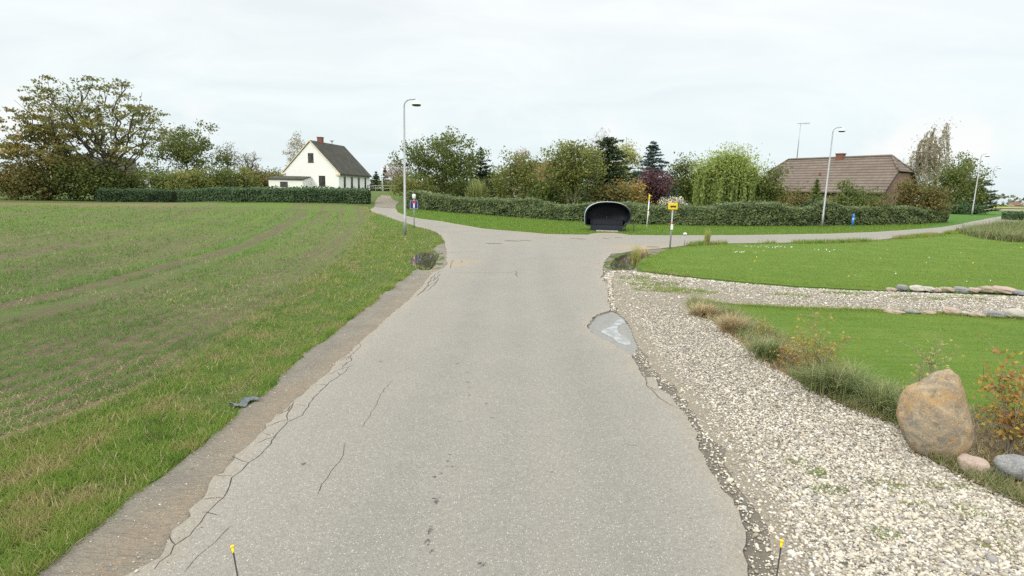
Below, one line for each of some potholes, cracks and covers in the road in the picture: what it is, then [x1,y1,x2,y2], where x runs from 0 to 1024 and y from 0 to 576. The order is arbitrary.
crack [154,343,361,570]
crack [641,373,677,408]
pothole [587,311,638,356]
crack [417,251,518,296]
